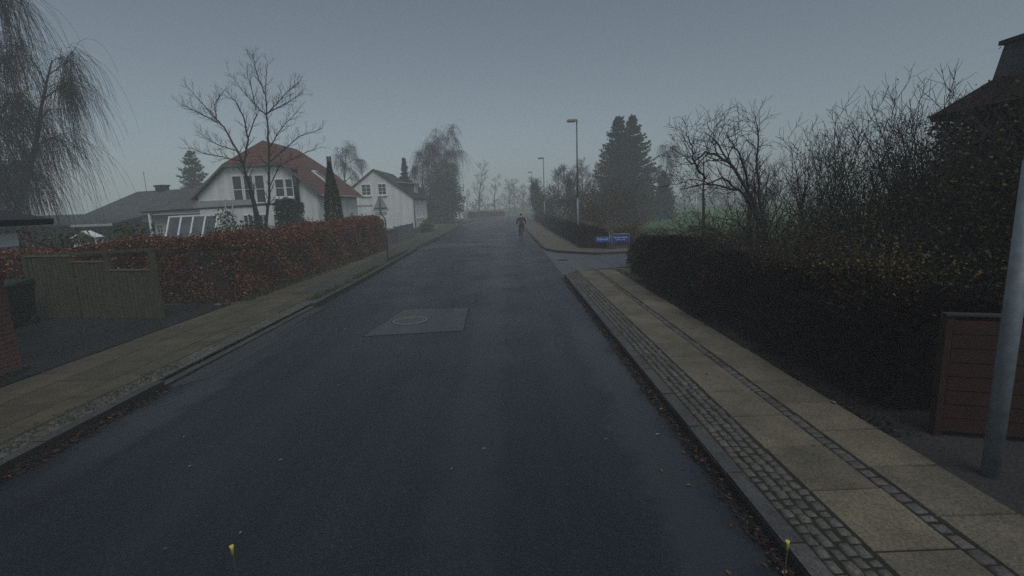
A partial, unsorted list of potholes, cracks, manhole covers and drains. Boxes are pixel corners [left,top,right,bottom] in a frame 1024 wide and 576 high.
manhole cover [391,316,429,325]
